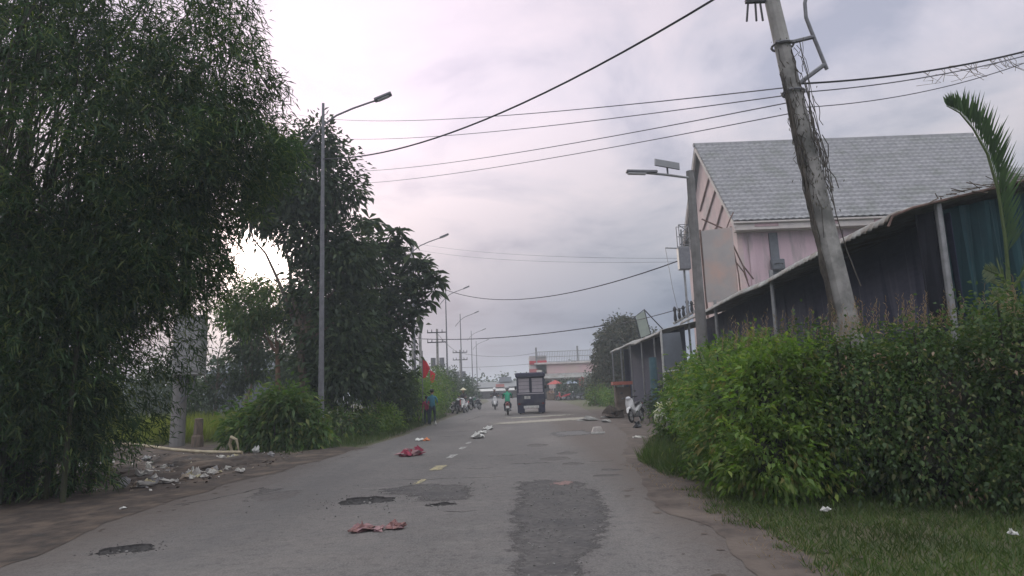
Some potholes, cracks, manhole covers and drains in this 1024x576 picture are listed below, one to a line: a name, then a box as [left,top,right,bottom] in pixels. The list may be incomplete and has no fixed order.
pothole [338,496,396,505]
pothole [95,544,155,555]
